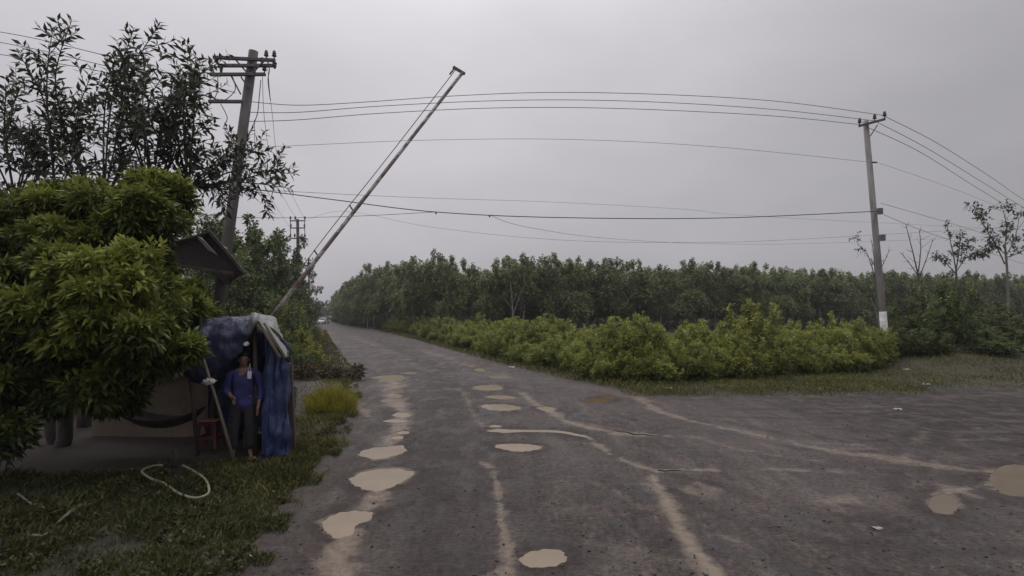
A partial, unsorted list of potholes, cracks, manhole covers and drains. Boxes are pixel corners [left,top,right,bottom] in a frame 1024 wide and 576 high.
pothole [518,548,568,568]
pothole [357,445,407,460]
pothole [495,443,542,452]
pothole [321,510,374,539]
pothole [348,468,415,491]
pothole [988,464,1024,496]
pothole [928,493,959,515]
